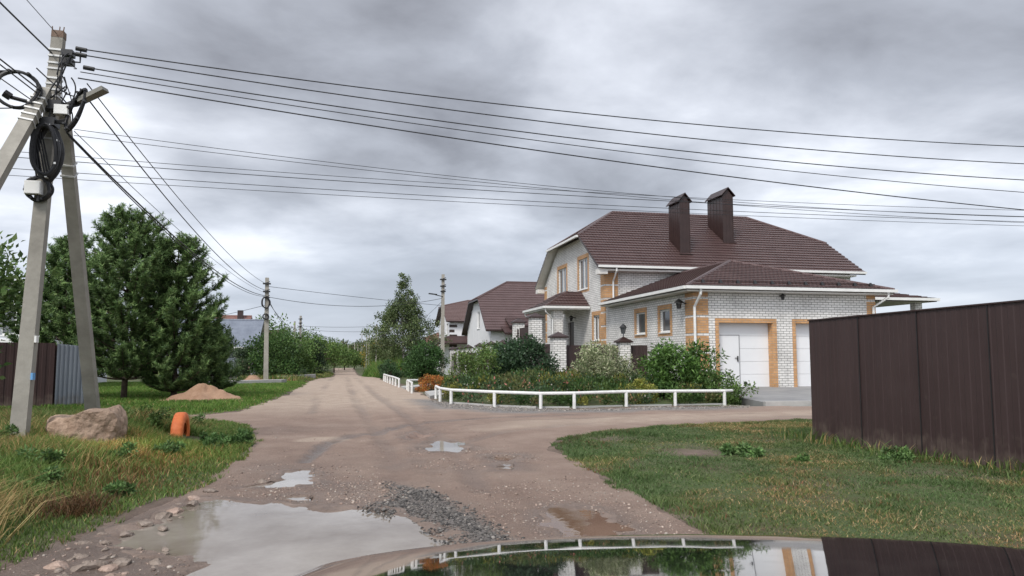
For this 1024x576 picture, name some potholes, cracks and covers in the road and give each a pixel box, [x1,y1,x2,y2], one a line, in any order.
pothole [495,461,514,470]
pothole [239,468,325,489]
pothole [91,496,472,576]
pothole [279,494,314,502]
pothole [414,441,474,453]
pothole [535,505,639,538]
